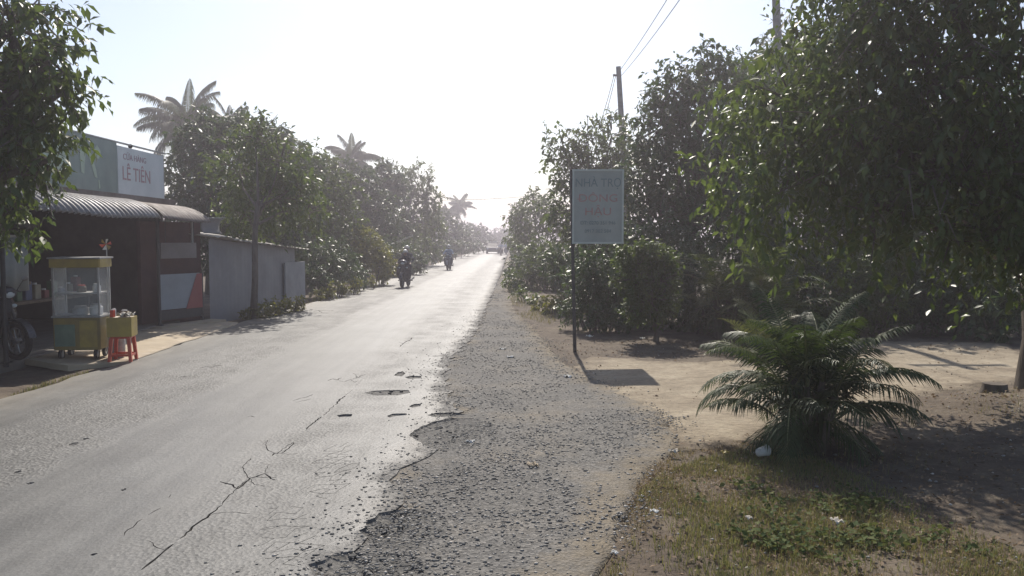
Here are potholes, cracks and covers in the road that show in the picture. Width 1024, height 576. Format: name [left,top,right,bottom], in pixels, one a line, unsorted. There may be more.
crack [124,373,362,570]
pothole [409,418,498,451]
